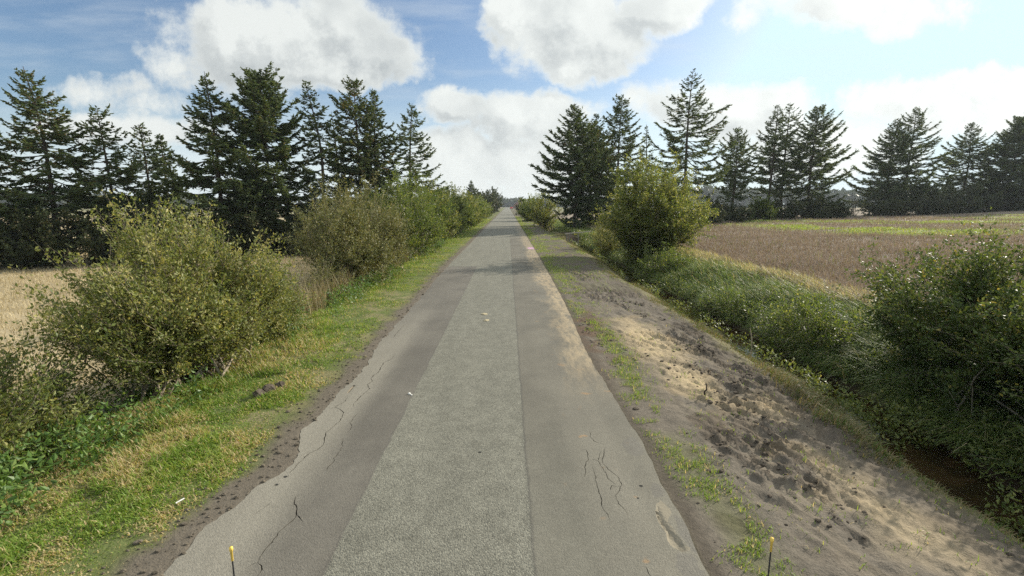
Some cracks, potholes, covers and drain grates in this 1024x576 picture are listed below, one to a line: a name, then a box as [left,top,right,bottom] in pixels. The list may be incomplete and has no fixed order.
crack [288,359,391,476]
pothole [655,501,690,552]
crack [247,499,303,576]
crack [584,433,628,517]
